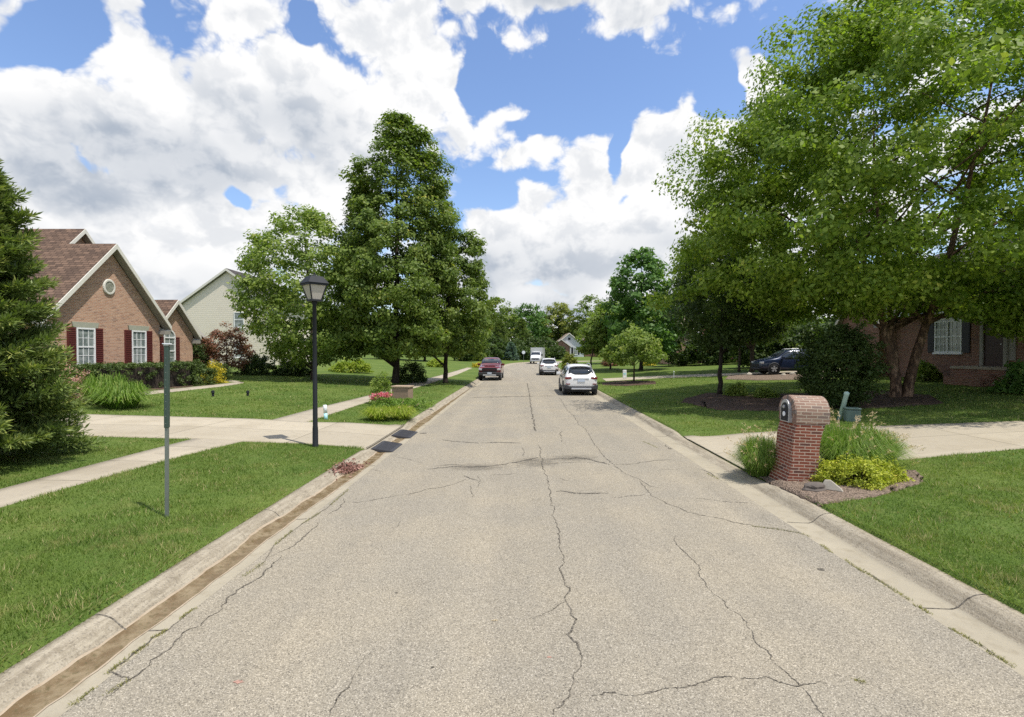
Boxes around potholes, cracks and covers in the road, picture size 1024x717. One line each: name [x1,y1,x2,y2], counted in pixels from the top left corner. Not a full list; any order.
crack [369,383,791,714]
crack [101,499,345,703]
